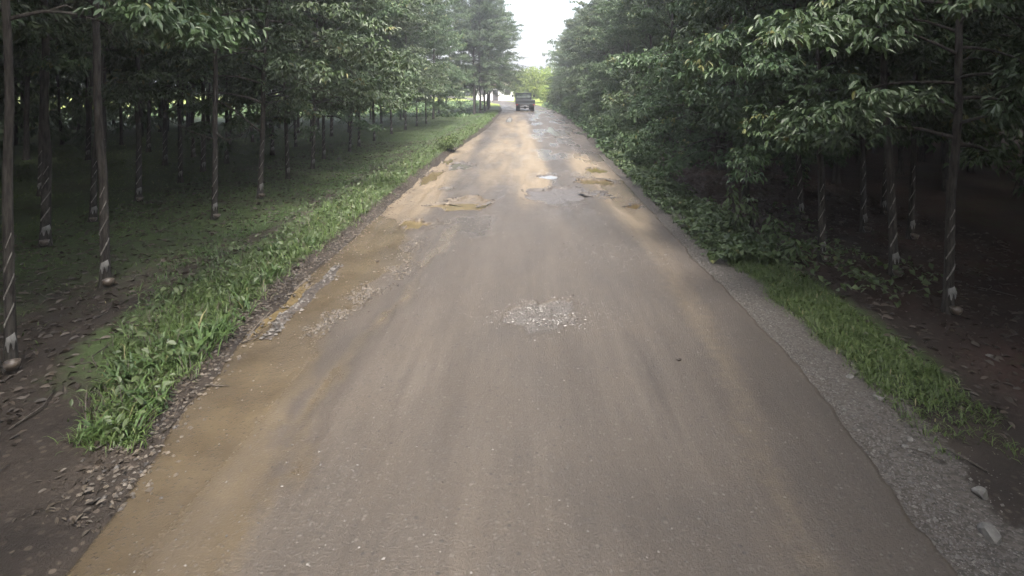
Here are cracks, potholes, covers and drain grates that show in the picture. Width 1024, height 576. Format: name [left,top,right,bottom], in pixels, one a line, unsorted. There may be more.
pothole [520,185,602,205]
pothole [574,177,618,186]
pothole [395,217,435,231]
pothole [418,170,446,186]
pothole [421,194,496,212]
pothole [486,292,587,341]
pothole [583,166,611,174]
pothole [242,276,317,341]
pothole [545,126,564,138]
